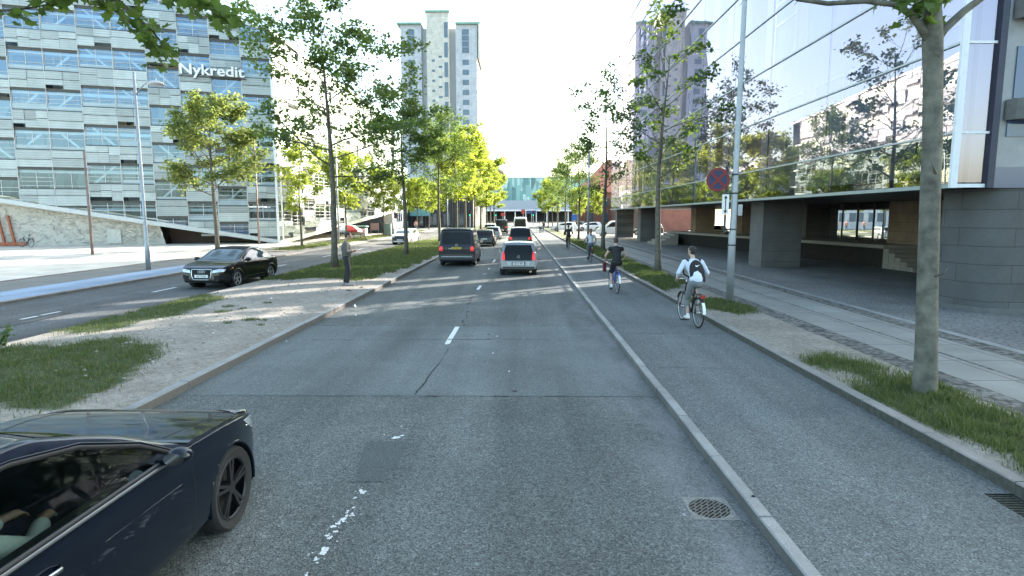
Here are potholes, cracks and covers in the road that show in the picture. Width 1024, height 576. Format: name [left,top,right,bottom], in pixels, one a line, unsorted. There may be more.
drain grate [681,497,740,520]
drain grate [984,493,1024,517]
crack [344,292,540,394]
